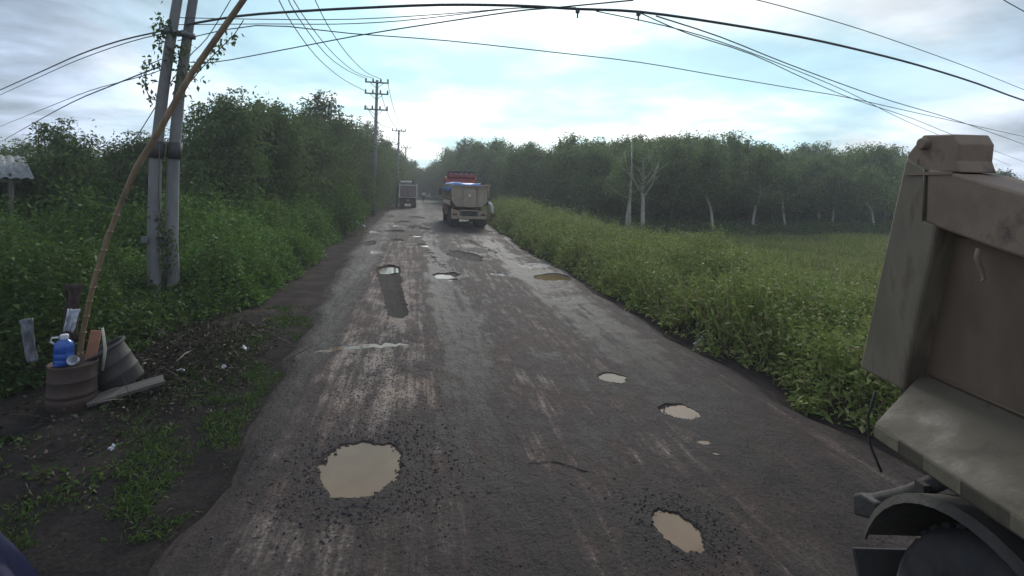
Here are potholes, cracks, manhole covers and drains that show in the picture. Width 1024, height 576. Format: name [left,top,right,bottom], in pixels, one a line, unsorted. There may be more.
crack [528,460,589,474]
pothole [533,273,572,281]
crack [316,342,410,352]
pothole [314,440,406,498]
pothole [657,403,701,420]
pothole [597,372,627,383]
pothole [446,250,484,262]
pothole [375,264,409,319]
pothole [651,507,707,554]
